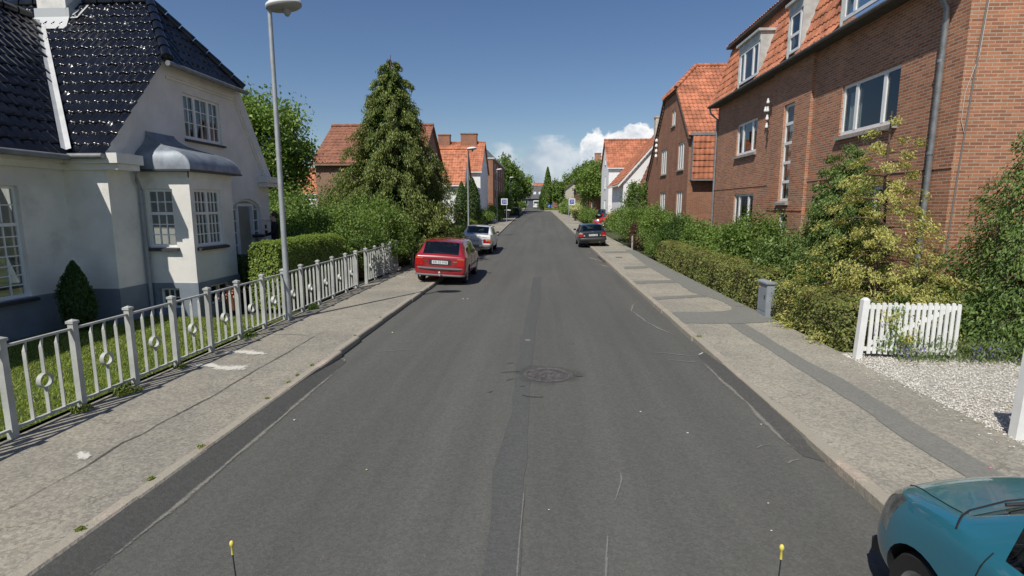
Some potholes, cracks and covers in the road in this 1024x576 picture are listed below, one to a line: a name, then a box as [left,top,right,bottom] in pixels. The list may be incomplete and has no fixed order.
manhole cover [524,367,571,382]
